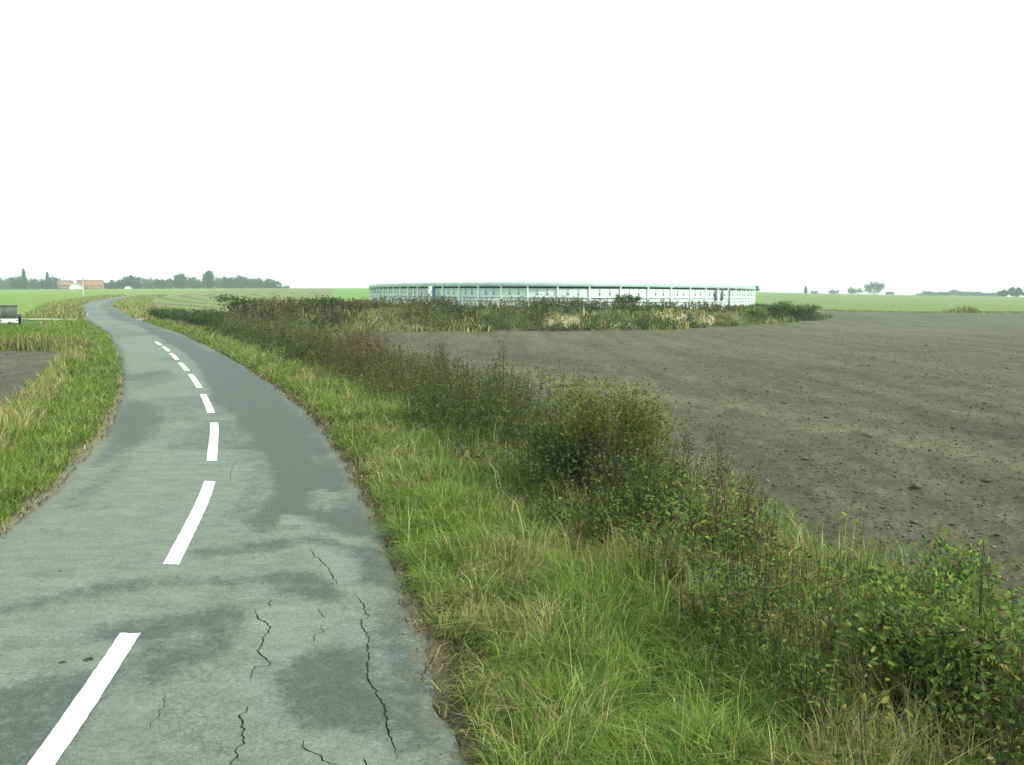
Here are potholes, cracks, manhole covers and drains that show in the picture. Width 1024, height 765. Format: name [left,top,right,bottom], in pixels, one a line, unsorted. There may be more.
crack [302,741,338,765]
crack [250,599,276,681]
crack [229,707,248,765]
crack [310,548,398,765]
